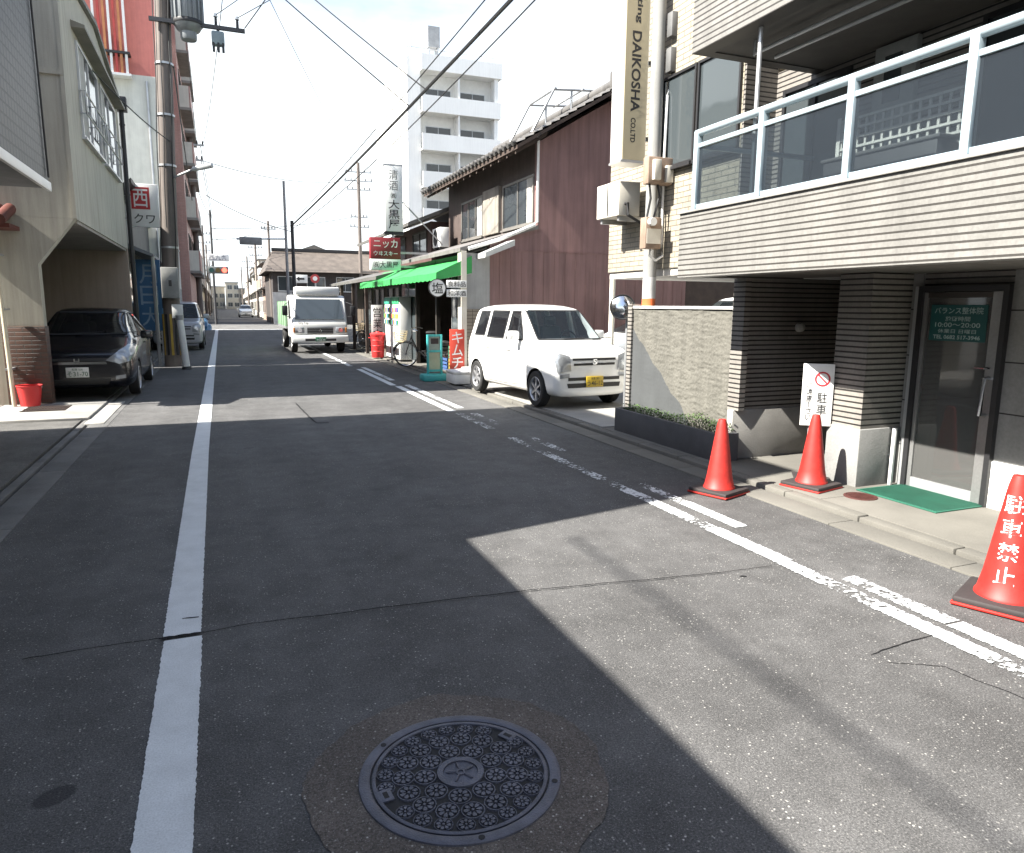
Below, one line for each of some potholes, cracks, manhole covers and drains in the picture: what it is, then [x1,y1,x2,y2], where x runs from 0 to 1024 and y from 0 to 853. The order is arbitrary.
manhole cover [358,715,561,847]
manhole cover [843,492,878,501]
crack [871,636,1024,699]
